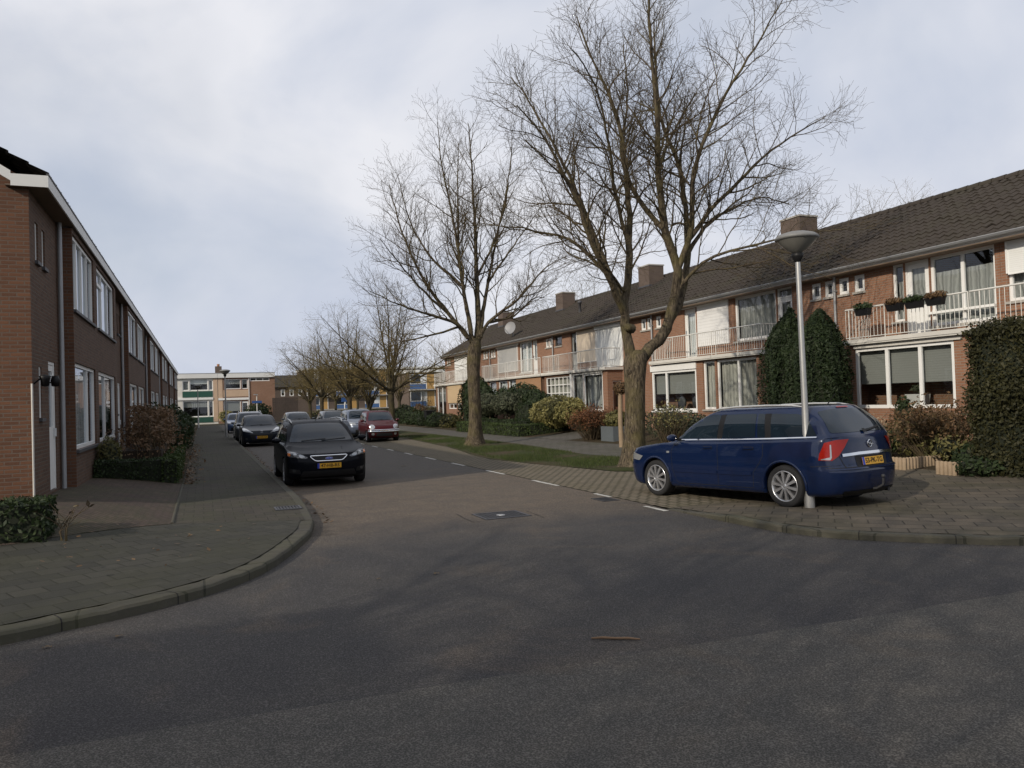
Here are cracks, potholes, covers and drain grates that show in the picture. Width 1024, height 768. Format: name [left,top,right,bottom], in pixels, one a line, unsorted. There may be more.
manhole cover [471,510,532,520]
